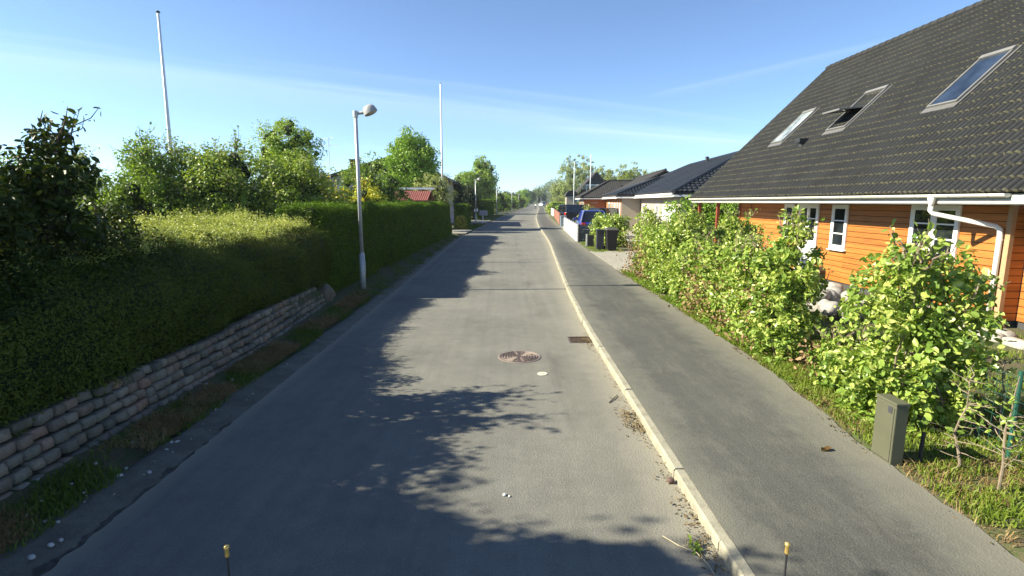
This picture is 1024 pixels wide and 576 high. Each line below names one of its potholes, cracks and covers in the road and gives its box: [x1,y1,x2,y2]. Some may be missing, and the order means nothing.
manhole cover [498,350,541,363]
